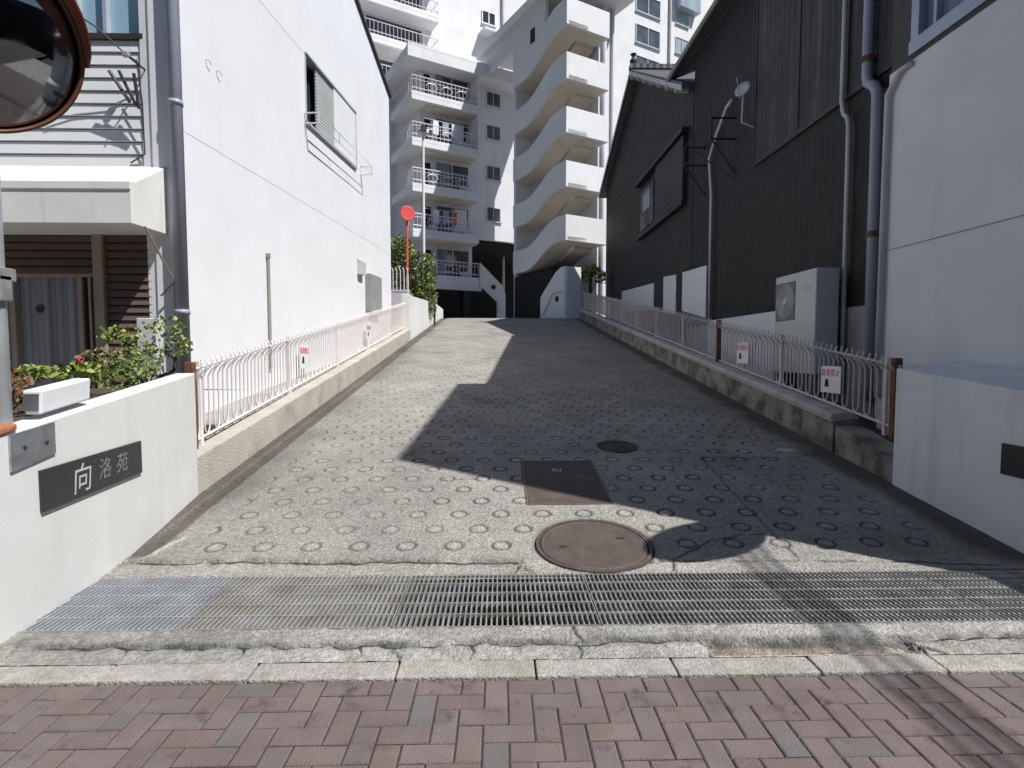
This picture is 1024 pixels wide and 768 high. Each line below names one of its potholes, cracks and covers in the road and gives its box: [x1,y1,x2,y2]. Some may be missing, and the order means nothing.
manhole cover [521,460,613,505]
manhole cover [535,519,654,574]
drain grate [583,572,808,626]
drain grate [913,570,1024,621]
drain grate [178,575,411,631]
drain grate [392,574,601,628]
crack [135,561,528,572]
drain grate [752,571,1005,624]
manhole cover [598,441,637,453]
crack [46,628,1024,661]
drain grate [20,577,237,633]
